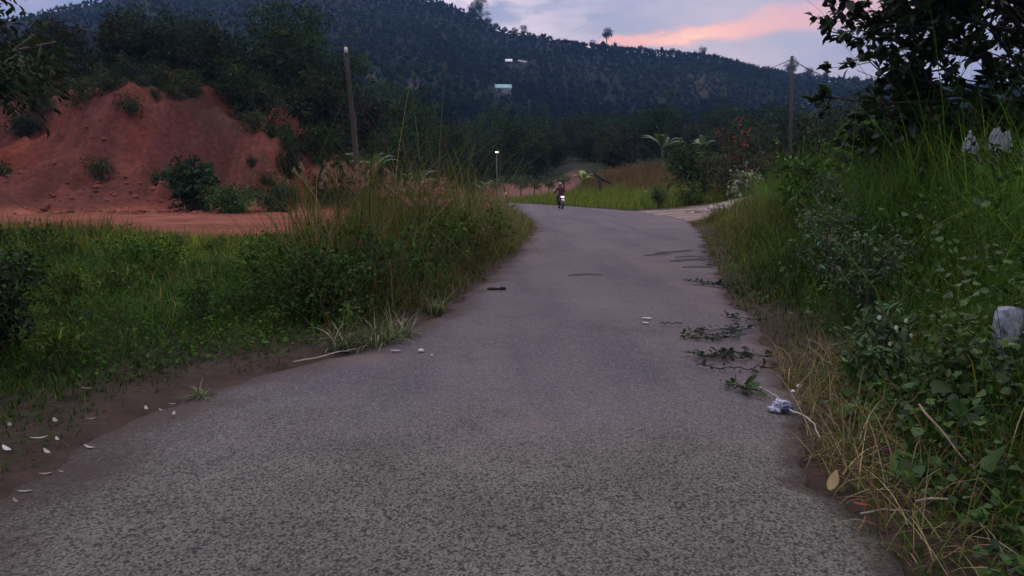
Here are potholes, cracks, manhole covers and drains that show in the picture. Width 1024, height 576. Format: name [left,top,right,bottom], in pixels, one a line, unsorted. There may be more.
crack [644,250,714,268]
